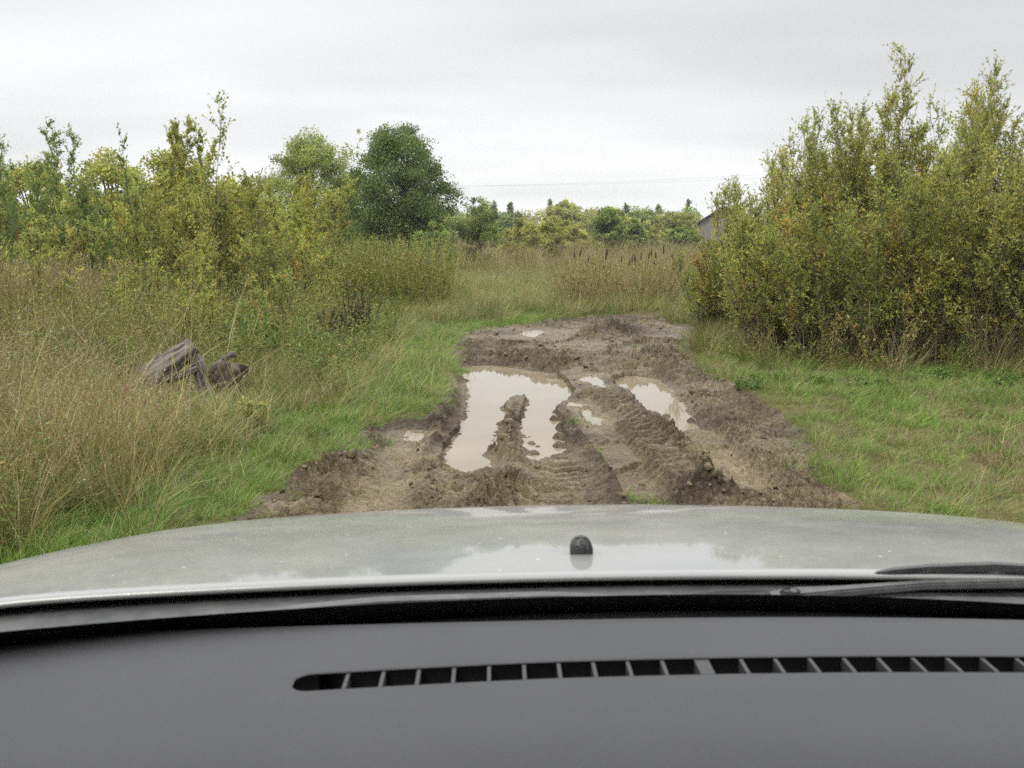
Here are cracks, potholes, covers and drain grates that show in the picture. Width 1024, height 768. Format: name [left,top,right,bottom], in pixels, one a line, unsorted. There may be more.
pothole [434,360,579,473]
pothole [609,370,707,432]
pothole [398,426,431,442]
pothole [512,328,549,337]
